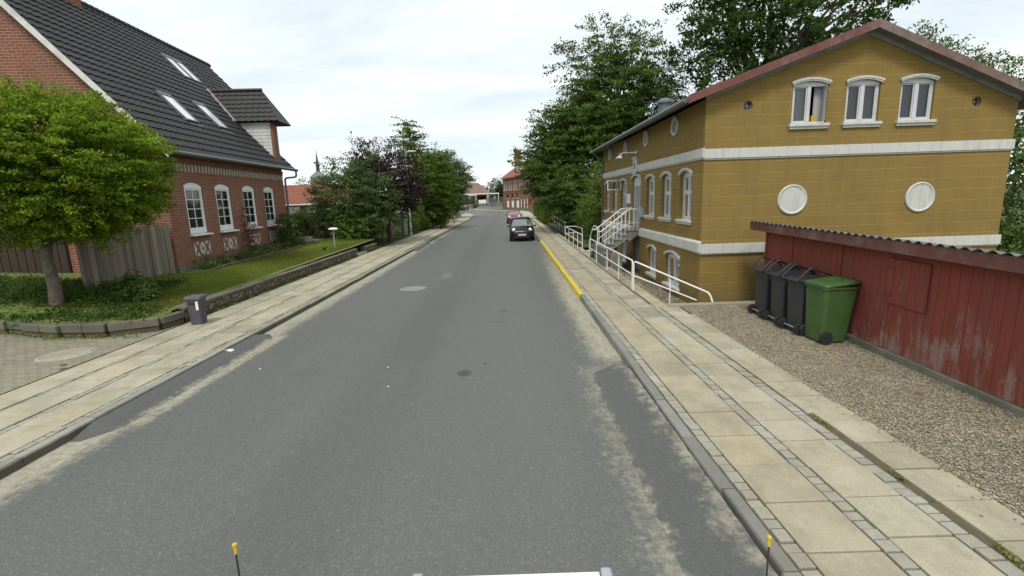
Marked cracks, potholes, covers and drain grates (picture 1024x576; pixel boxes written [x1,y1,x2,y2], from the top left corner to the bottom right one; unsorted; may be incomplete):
manhole cover [34,347,97,363]
